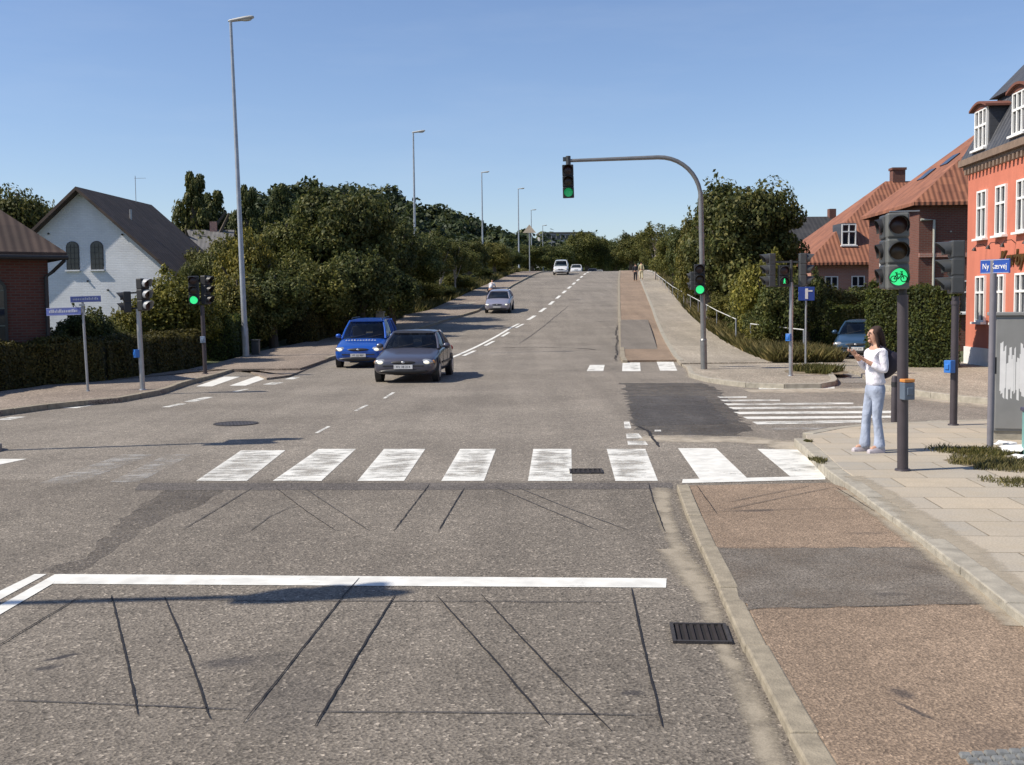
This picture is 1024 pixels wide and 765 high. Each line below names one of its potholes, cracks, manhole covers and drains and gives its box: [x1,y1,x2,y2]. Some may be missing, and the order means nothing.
drain grate [669,622,733,645]
